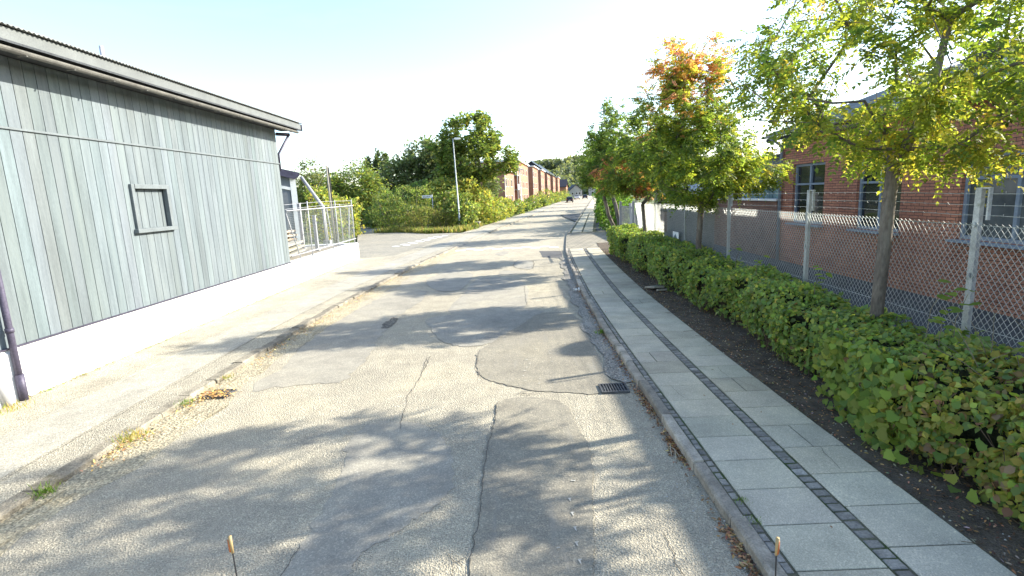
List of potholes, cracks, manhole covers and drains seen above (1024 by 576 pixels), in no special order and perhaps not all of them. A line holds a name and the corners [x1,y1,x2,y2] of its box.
drain grate [598,383,630,394]
